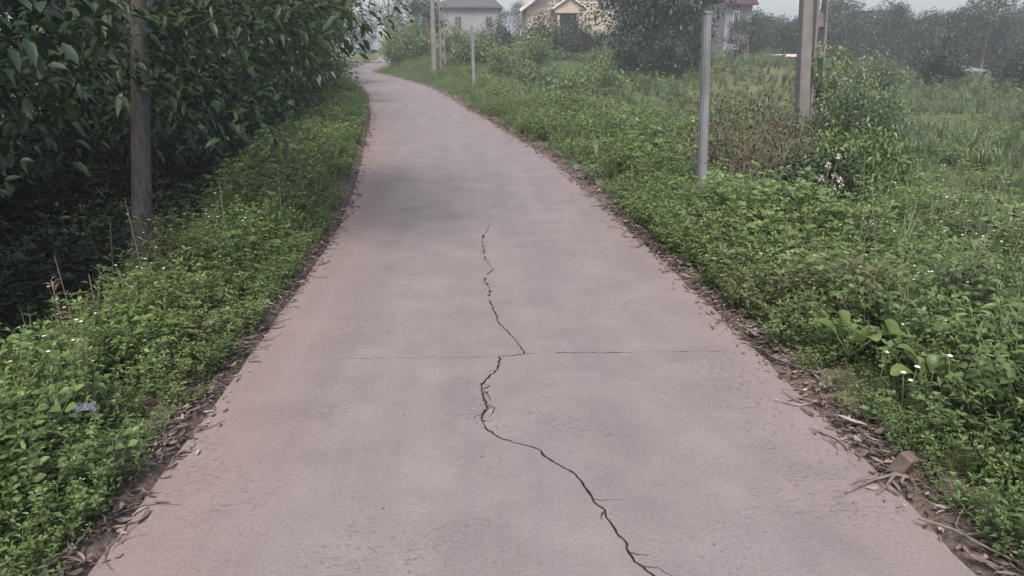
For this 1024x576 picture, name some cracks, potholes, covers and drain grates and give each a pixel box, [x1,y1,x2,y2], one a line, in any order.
crack [352,206,694,576]
